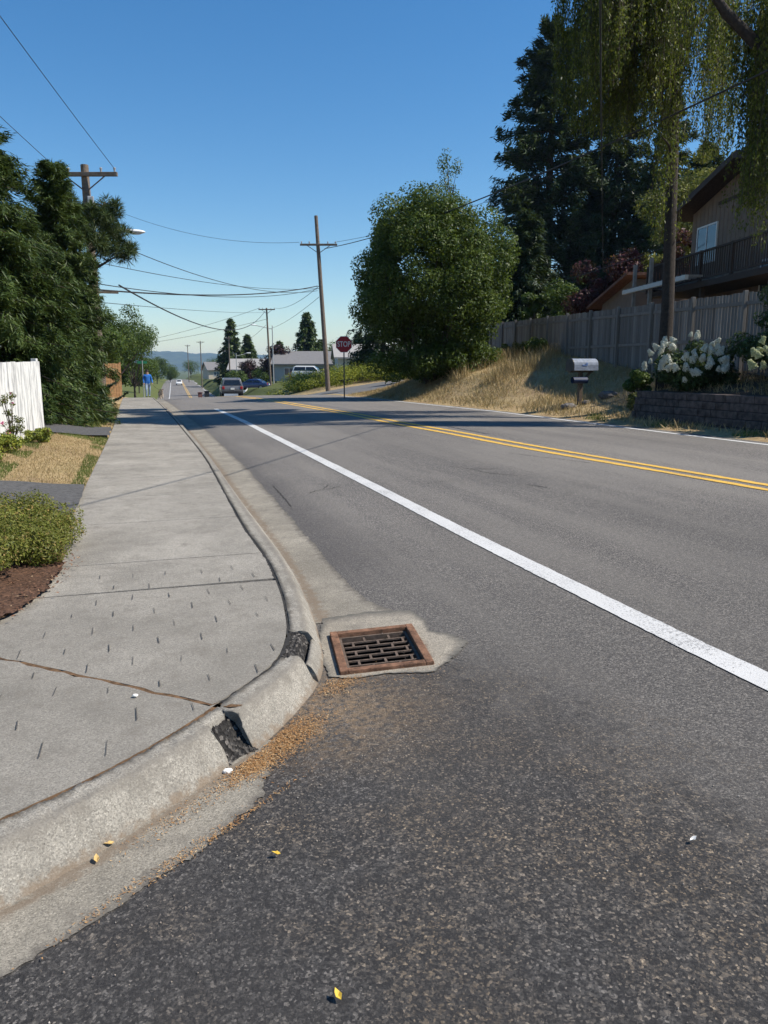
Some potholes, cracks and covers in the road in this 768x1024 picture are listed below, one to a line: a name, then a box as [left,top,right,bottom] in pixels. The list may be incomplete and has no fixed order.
drain grate [330,623,434,675]
